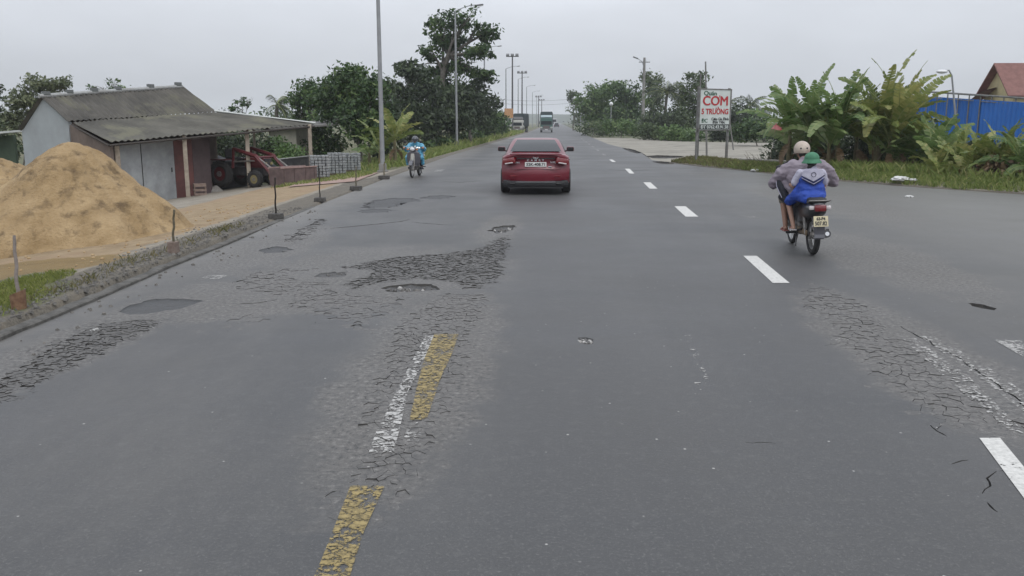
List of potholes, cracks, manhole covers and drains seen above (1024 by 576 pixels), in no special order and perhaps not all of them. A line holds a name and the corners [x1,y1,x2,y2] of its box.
pothole [487,225,515,234]
crack [952,460,1004,512]
crack [782,283,1024,439]
crack [0,317,173,407]
crack [190,217,519,536]
pothole [381,284,440,292]
